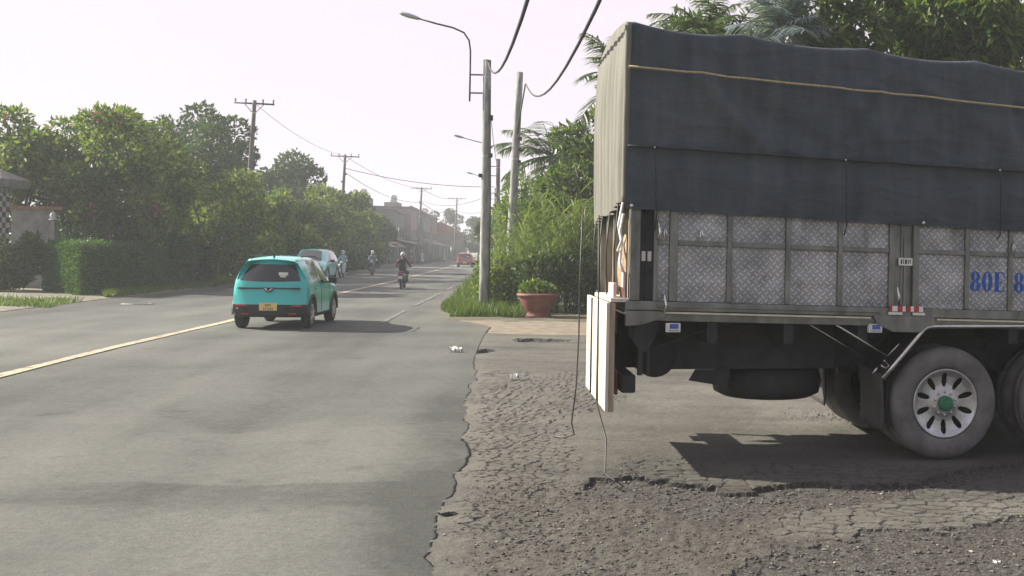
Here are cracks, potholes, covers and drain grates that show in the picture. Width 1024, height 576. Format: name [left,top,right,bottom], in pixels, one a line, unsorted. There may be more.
pothole [562,459,1024,525]
crack [460,370,1024,576]
